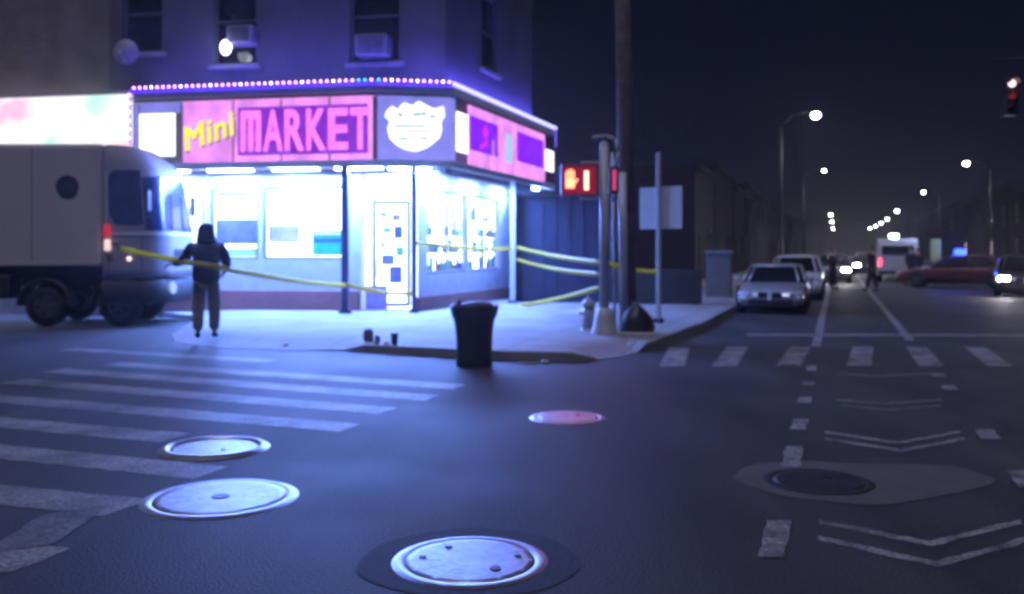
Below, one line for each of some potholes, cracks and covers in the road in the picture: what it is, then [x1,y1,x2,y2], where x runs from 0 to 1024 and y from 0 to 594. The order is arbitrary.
manhole cover [529,411,607,425]
manhole cover [157,435,270,461]
manhole cover [763,468,876,495]
manhole cover [138,479,299,520]
manhole cover [391,536,548,589]
